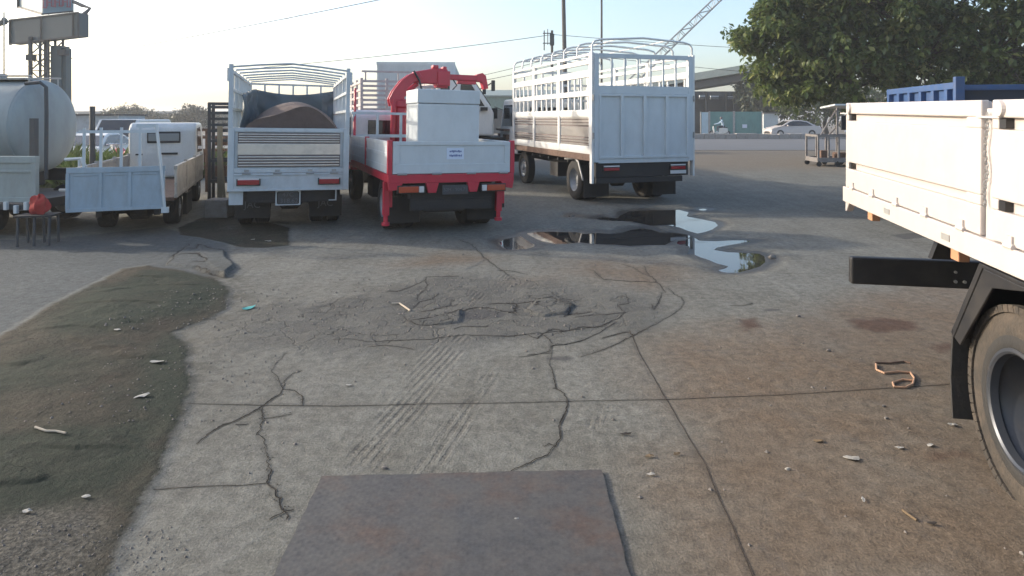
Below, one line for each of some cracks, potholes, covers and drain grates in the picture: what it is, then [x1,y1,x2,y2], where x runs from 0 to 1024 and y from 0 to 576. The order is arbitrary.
crack [196,353,304,520]
crack [333,264,684,471]
crack [167,244,223,278]
